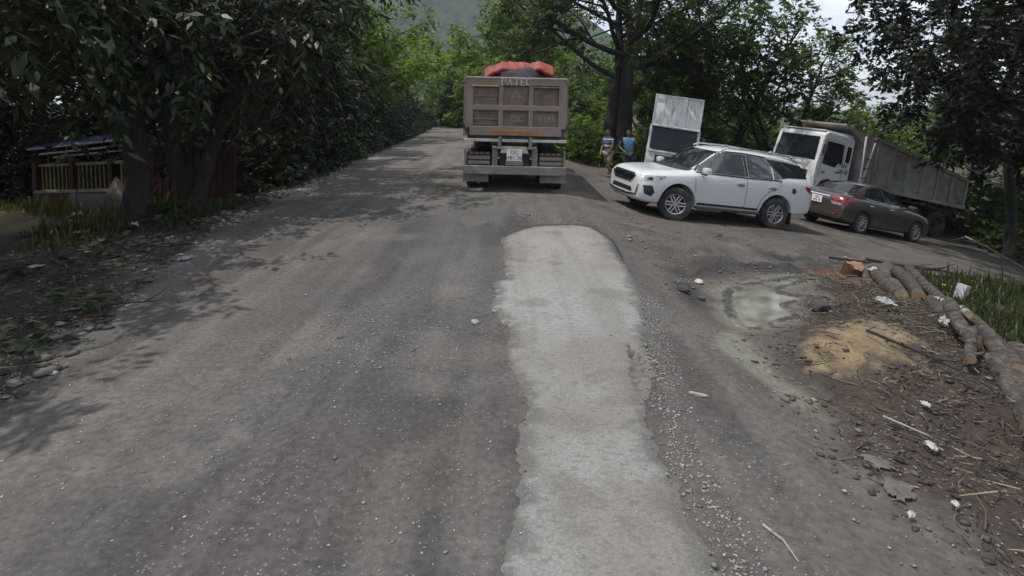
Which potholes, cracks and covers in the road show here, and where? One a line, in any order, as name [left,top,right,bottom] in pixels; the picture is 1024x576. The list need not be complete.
pothole [721,276,823,330]
